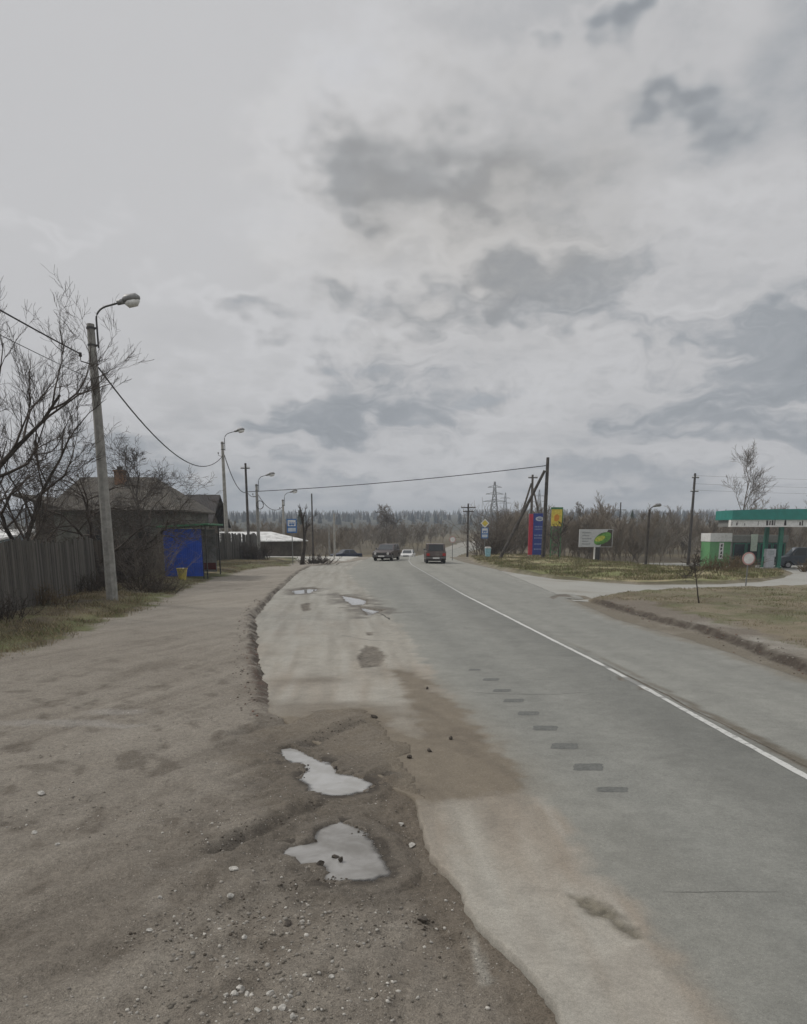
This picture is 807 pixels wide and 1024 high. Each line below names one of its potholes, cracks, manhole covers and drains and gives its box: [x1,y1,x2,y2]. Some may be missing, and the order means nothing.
pothole [249,808,426,899]
pothole [333,594,375,606]
pothole [352,605,393,617]
pothole [250,739,397,807]
pothole [555,888,660,950]
pothole [283,587,325,595]
